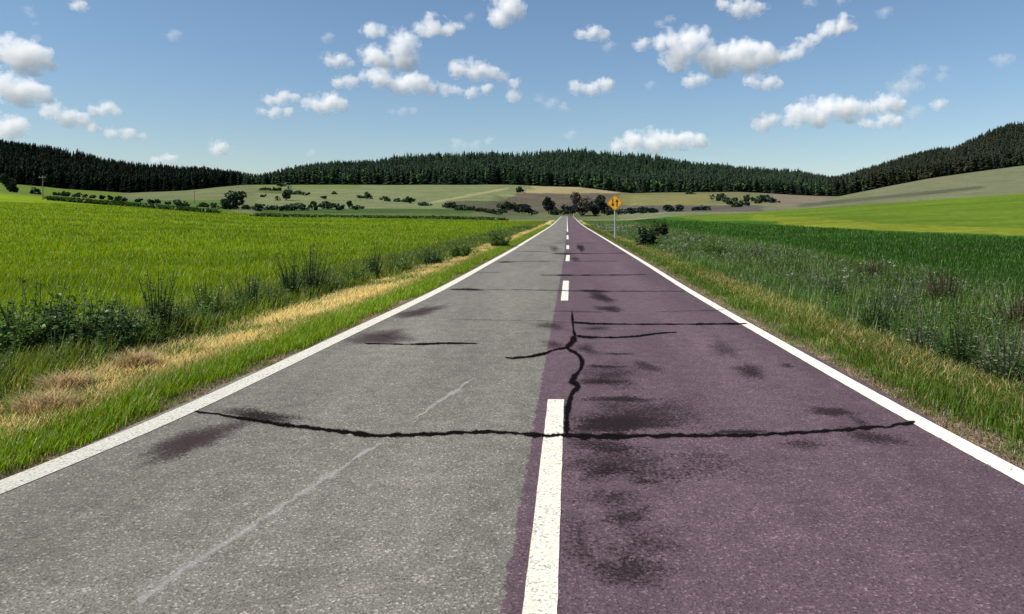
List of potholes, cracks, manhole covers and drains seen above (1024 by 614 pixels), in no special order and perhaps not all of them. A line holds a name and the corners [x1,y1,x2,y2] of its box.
crack [196,310,915,440]
